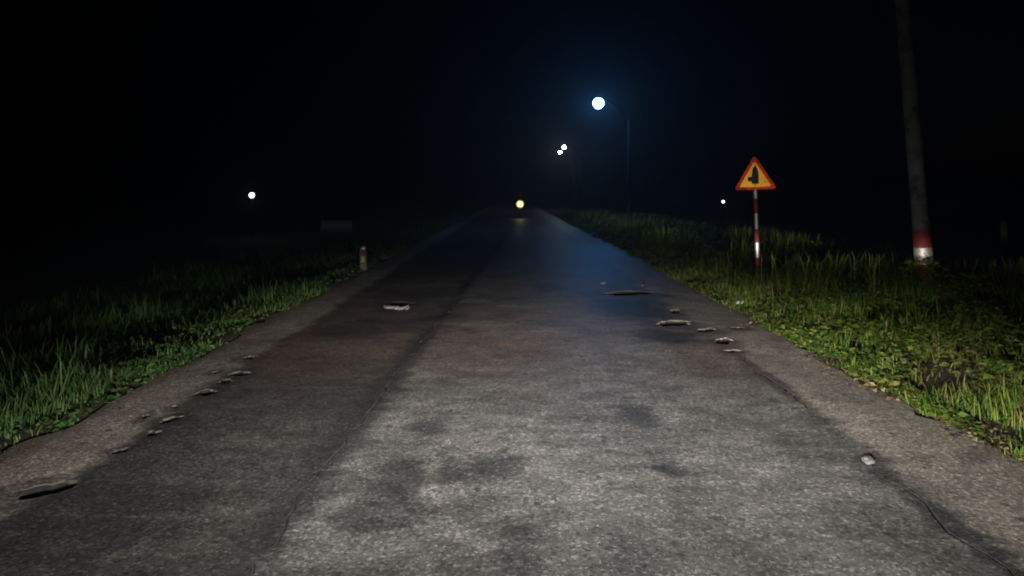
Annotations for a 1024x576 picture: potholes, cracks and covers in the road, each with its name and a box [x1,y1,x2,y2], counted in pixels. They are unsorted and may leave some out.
crack [743,356,809,411]
pothole [16,479,78,500]
crack [881,477,1016,576]
pothole [384,301,417,310]
